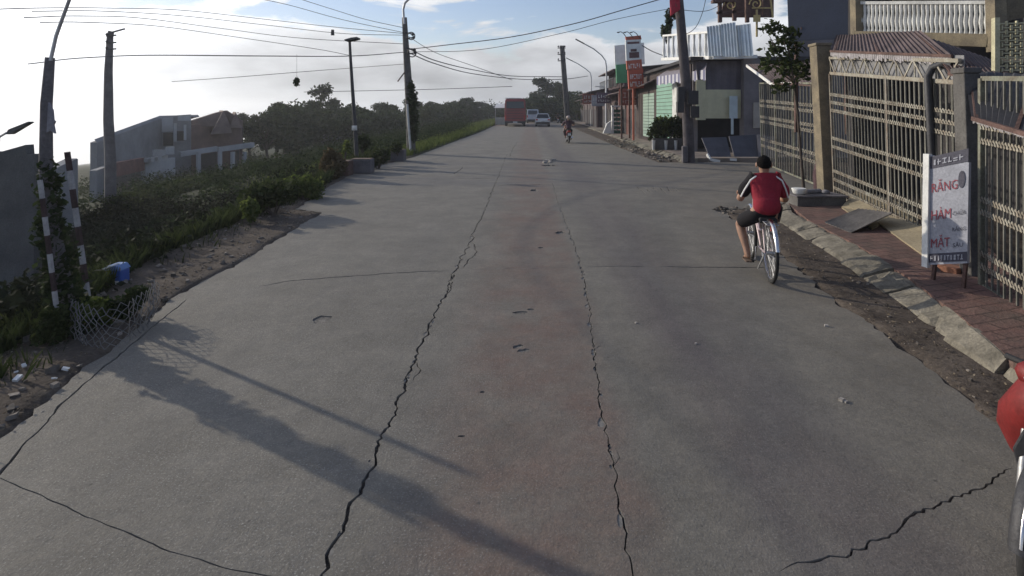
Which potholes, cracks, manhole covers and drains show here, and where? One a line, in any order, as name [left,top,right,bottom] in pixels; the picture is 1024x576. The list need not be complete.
crack [779,468,1012,572]
pothole [312,315,337,324]
crack [0,300,270,576]
crack [263,142,770,576]
